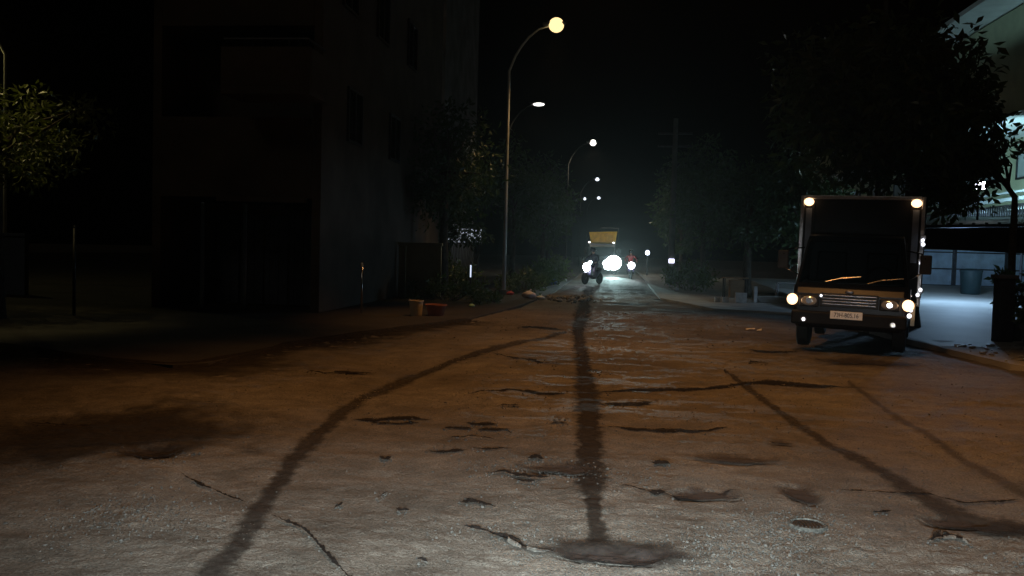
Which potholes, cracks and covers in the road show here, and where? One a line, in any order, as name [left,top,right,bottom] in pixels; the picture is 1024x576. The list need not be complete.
crack [271,502,352,576]
pothole [697,454,773,463]
pothole [554,548,682,565]
crack [465,525,554,552]
crack [181,472,244,501]
pothole [121,445,180,459]
pothole [783,488,818,504]
crack [597,349,858,405]
pothole [675,488,739,501]
